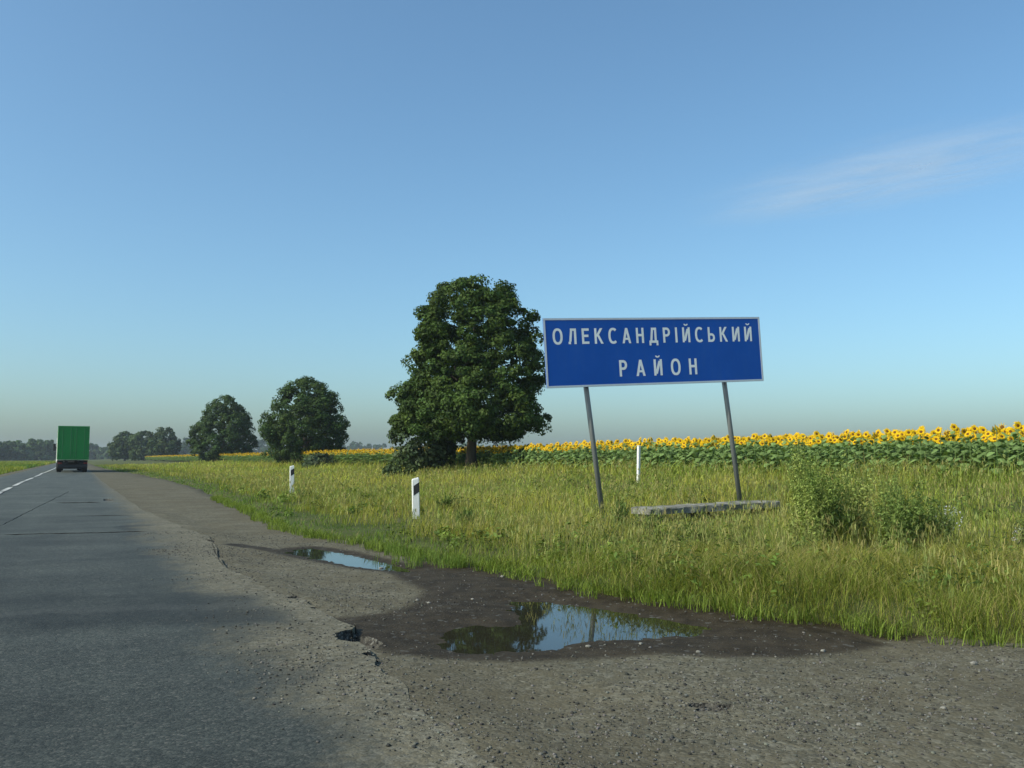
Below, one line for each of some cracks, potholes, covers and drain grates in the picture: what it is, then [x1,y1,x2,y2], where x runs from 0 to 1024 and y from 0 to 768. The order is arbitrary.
crack [0,491,145,535]
pothole [335,629,383,650]
